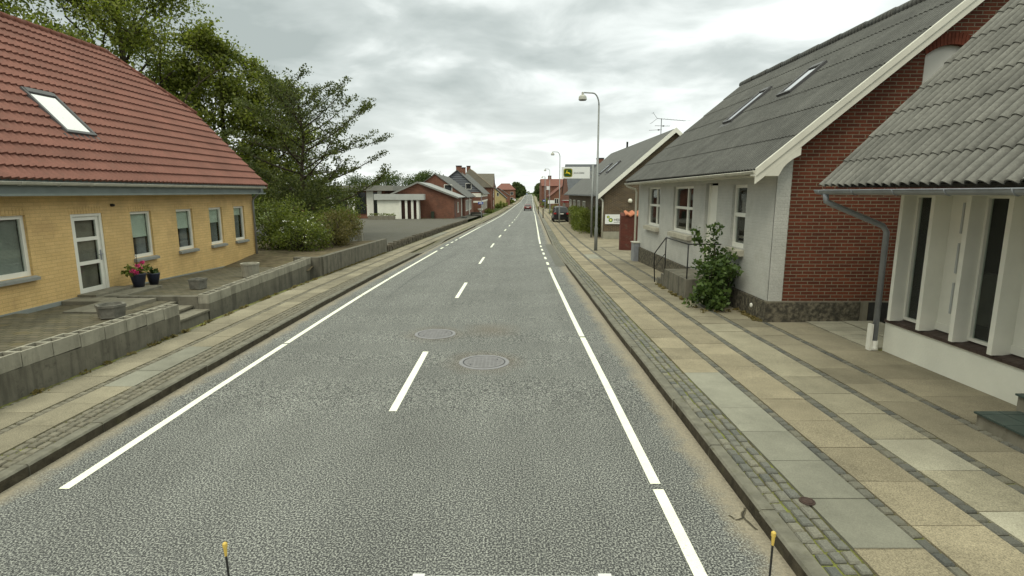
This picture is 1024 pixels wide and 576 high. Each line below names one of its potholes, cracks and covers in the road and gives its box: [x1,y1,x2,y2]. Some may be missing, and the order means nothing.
manhole cover [415,329,456,339]
manhole cover [459,355,509,370]
